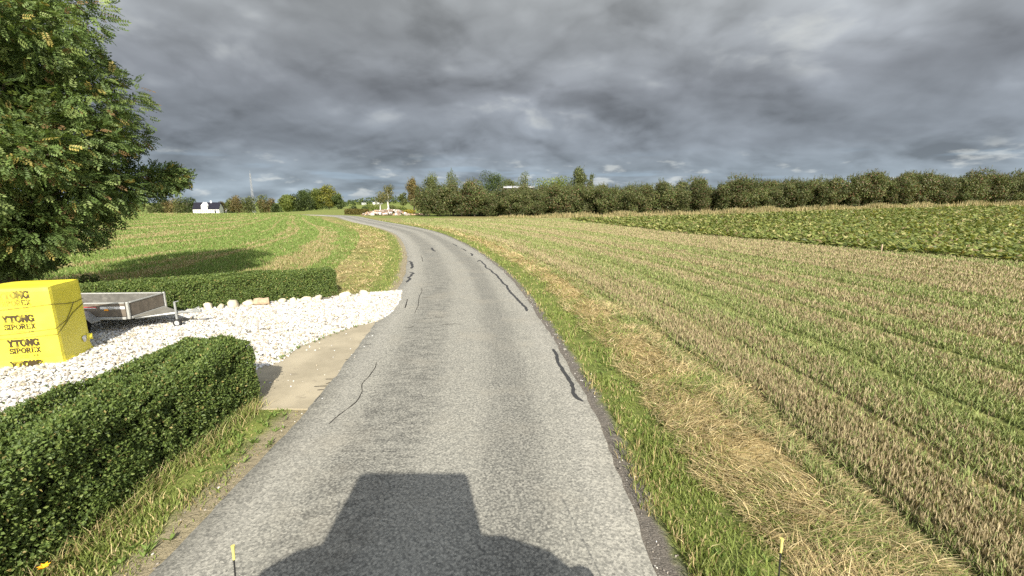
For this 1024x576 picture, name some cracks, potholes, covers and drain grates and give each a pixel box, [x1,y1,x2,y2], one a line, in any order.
crack [329,362,377,424]
